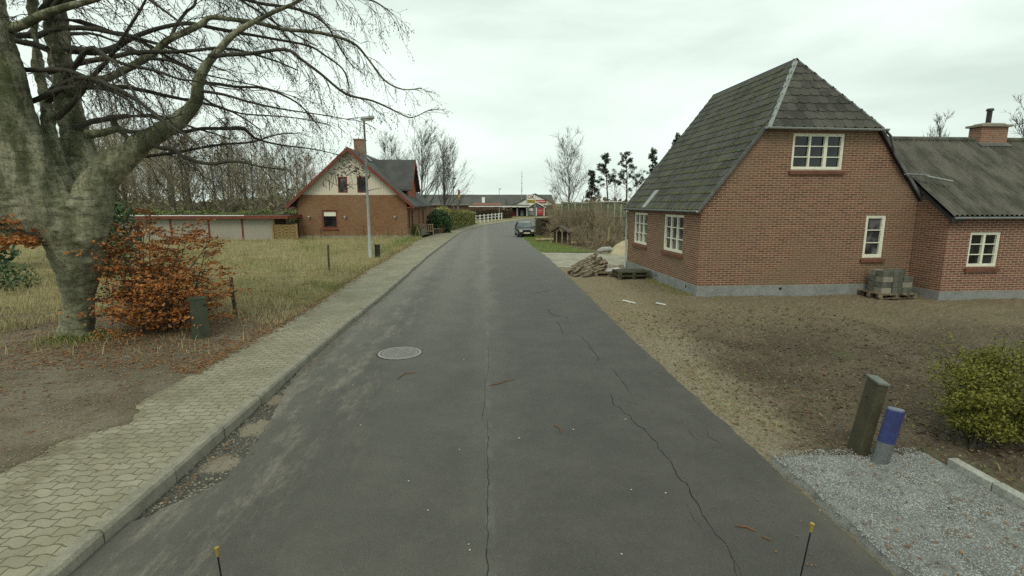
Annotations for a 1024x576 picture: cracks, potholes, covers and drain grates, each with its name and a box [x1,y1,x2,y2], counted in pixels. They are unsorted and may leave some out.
pothole [134,374,296,521]
crack [589,345,742,576]
manhole cover [377,347,422,360]
